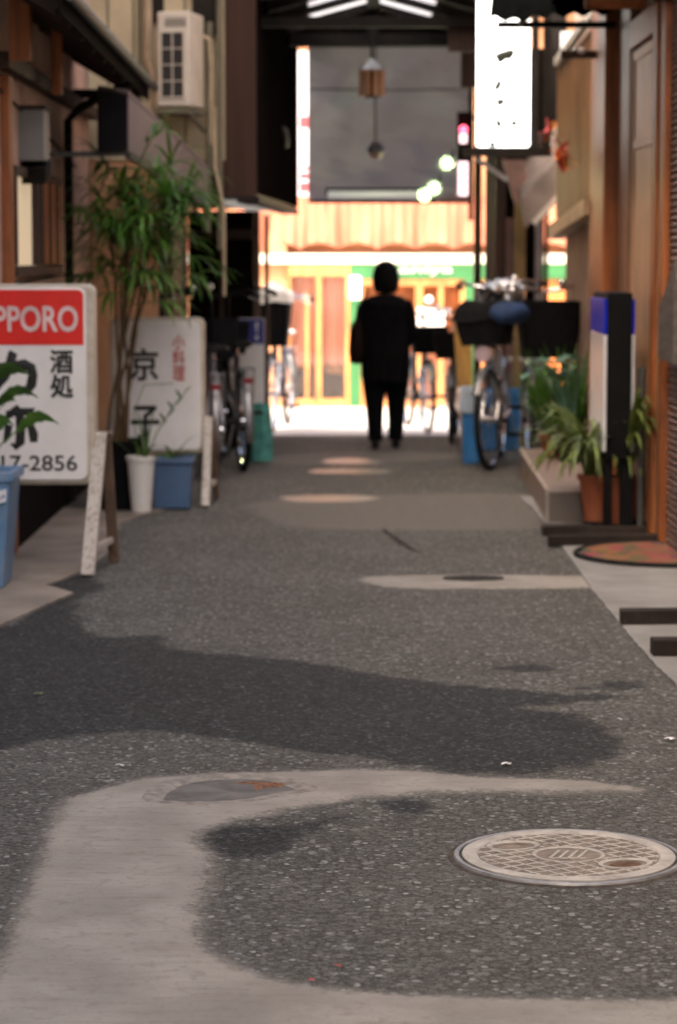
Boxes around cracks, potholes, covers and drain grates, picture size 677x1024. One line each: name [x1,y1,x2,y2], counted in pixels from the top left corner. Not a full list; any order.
manhole cover [448,829,677,888]
crack [382,529,421,553]
